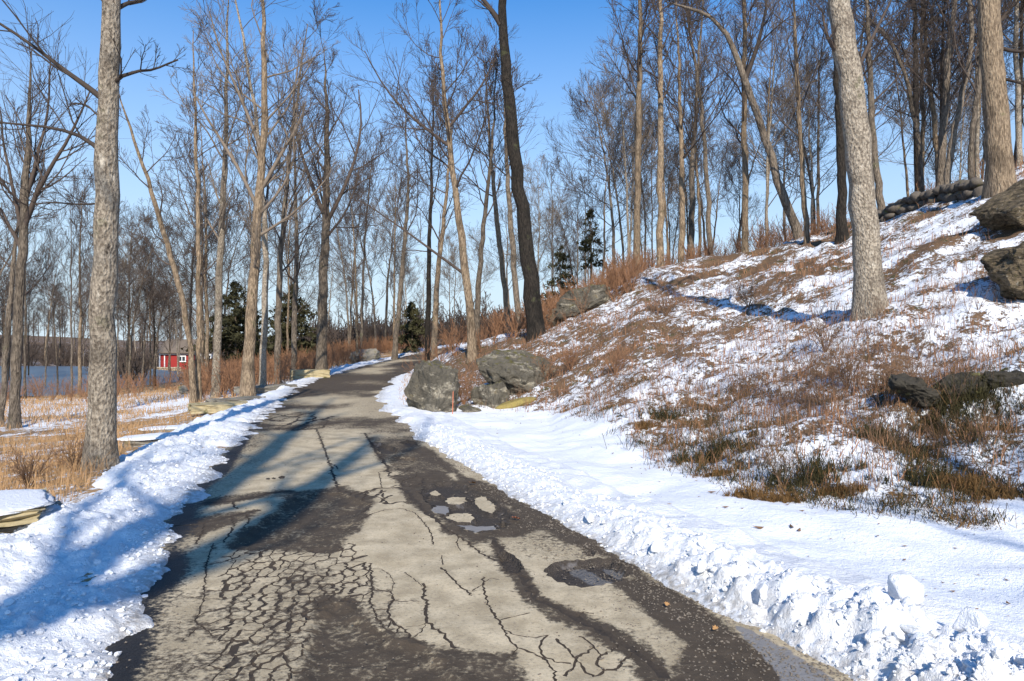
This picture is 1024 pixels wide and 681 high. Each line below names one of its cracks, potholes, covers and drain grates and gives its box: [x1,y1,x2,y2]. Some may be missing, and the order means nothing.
pothole [544,557,630,588]
crack [174,412,670,681]
pothole [418,482,515,534]
